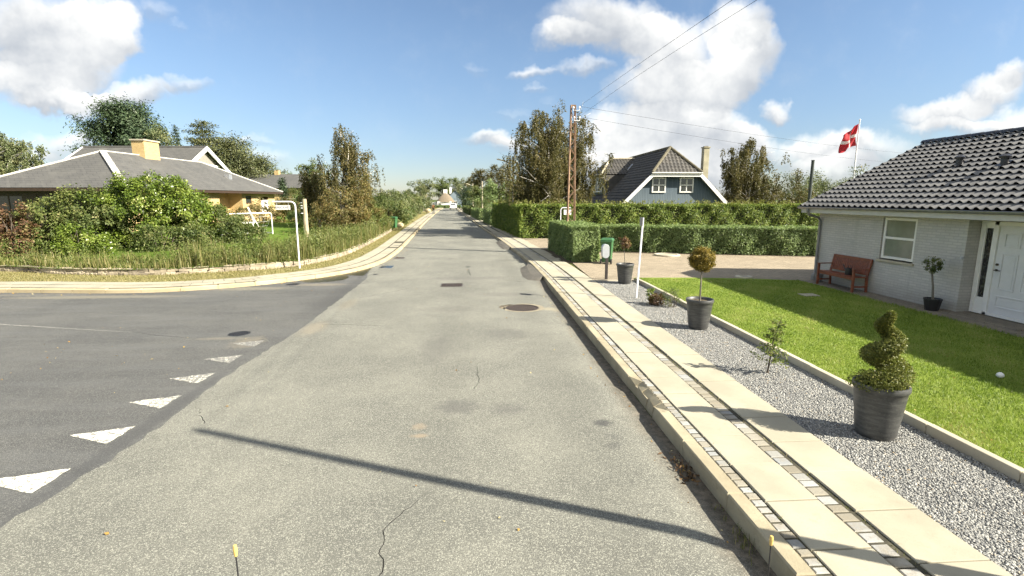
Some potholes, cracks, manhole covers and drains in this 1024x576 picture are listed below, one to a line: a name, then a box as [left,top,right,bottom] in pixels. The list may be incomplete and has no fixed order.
crack [378,495,423,576]
manhole cover [505,304,544,312]
